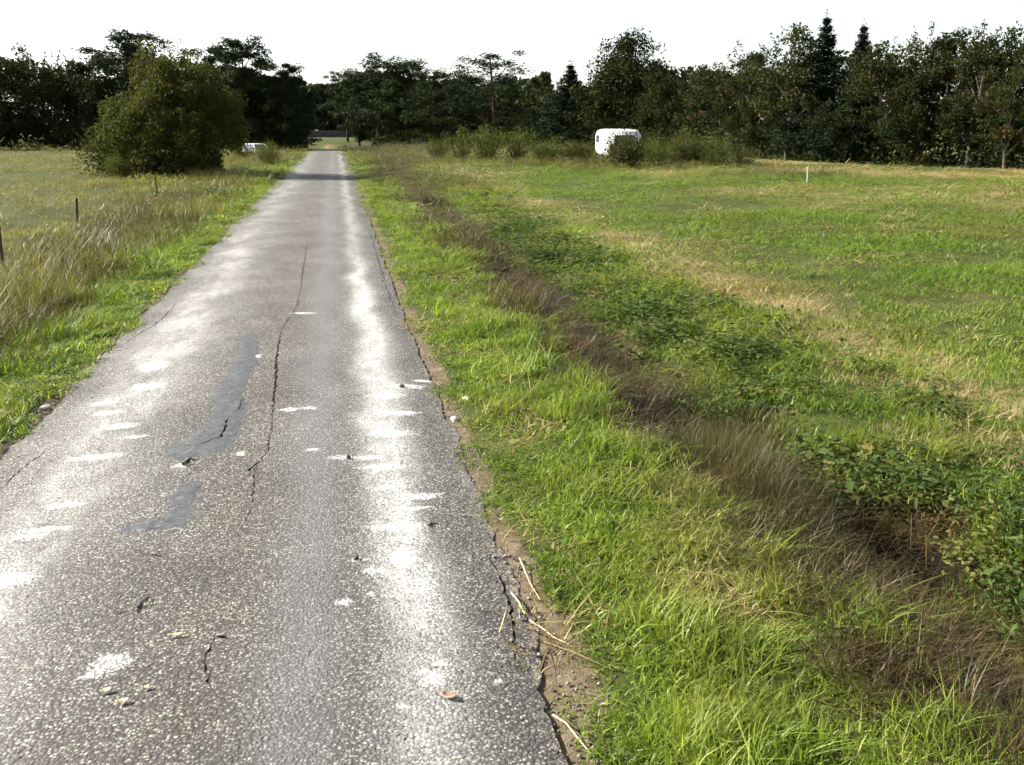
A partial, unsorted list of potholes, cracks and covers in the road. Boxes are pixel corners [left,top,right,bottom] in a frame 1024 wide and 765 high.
crack [489,554,519,663]
crack [237,249,307,536]
crack [204,632,230,691]
